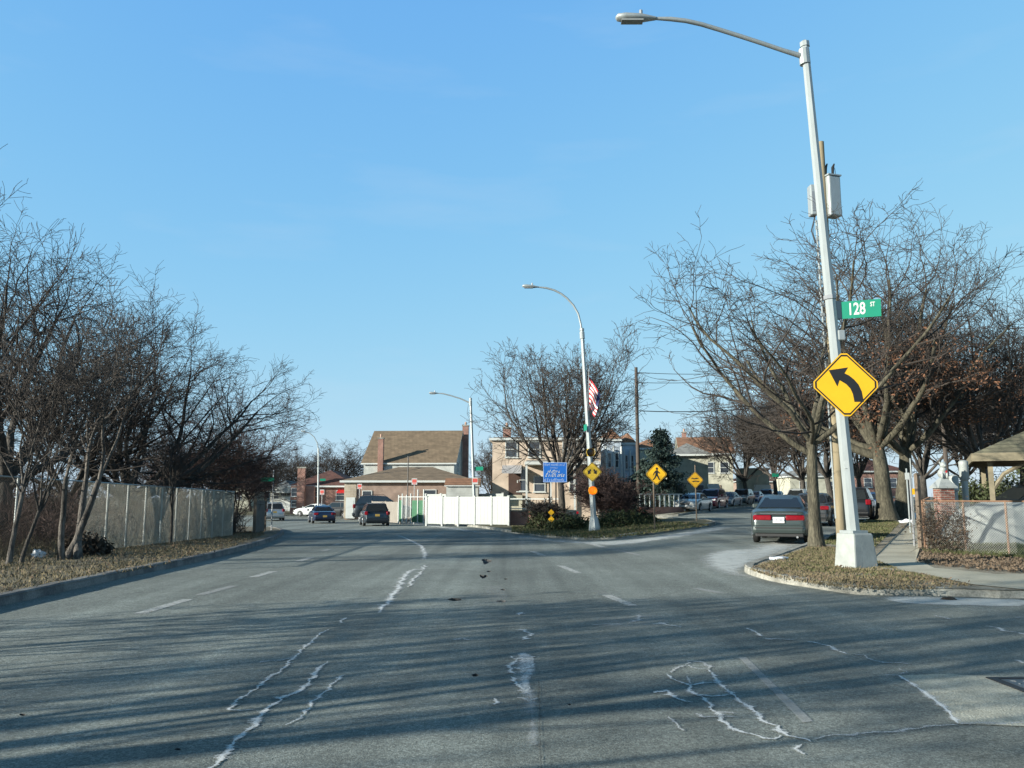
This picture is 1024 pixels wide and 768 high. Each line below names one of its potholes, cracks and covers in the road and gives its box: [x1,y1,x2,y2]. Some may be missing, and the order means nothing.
crack [208,618,347,768]
crack [653,628,1024,754]
crack [493,612,536,704]
crack [377,536,429,613]
utility cover [986,677,1024,692]
